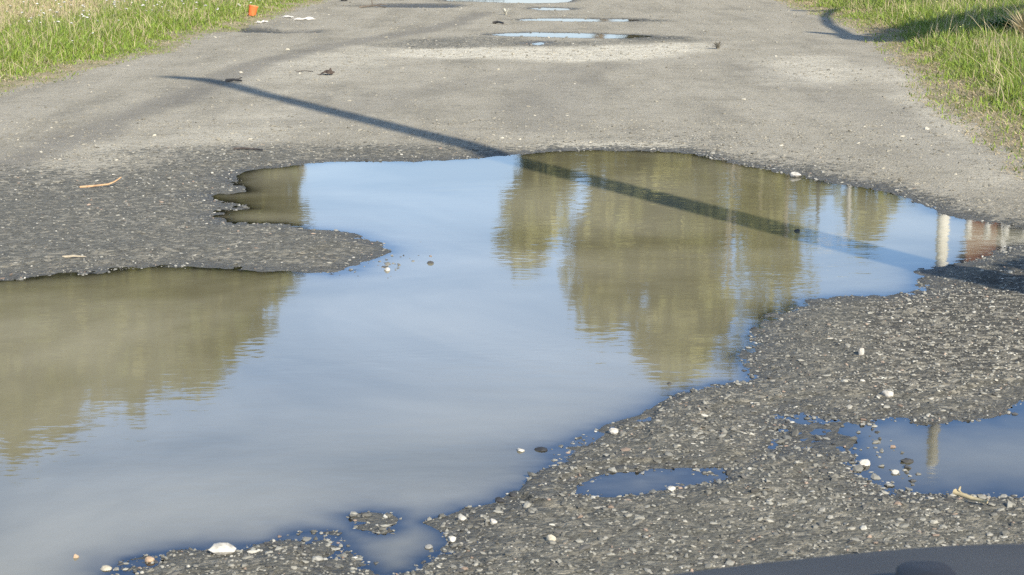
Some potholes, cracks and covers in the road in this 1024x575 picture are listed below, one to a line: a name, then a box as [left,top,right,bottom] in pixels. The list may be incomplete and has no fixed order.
pothole [469,31,671,39]
pothole [0,142,1024,575]
